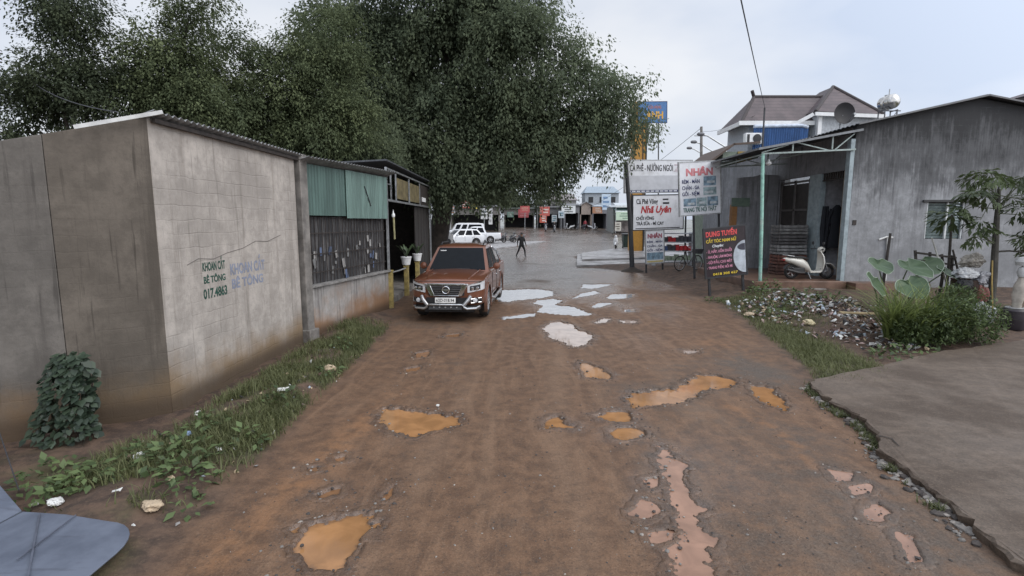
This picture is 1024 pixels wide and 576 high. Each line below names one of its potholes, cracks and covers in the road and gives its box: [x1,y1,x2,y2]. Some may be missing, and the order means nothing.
pothole [280,504,395,576]
pothole [494,288,558,302]
pothole [635,523,681,550]
pothole [619,494,669,526]
pothole [852,496,903,529]
pothole [601,423,652,443]
pothole [531,298,600,316]
pothole [585,406,641,424]
pothole [645,439,737,576]
pothole [538,320,597,349]
pothole [816,465,868,485]
pothole [410,349,435,359]
